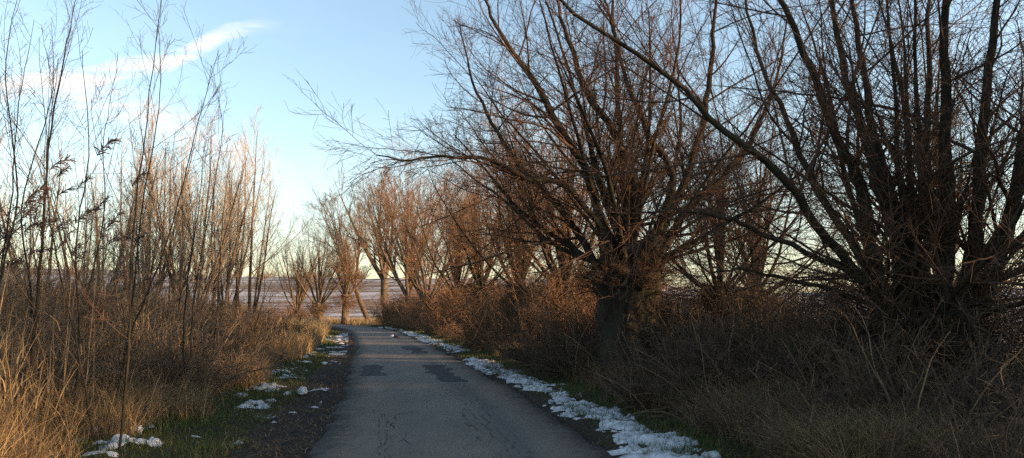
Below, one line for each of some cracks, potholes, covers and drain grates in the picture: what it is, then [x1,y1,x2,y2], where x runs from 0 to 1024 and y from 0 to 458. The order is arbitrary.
crack [374,413,412,458]
crack [442,384,532,458]
